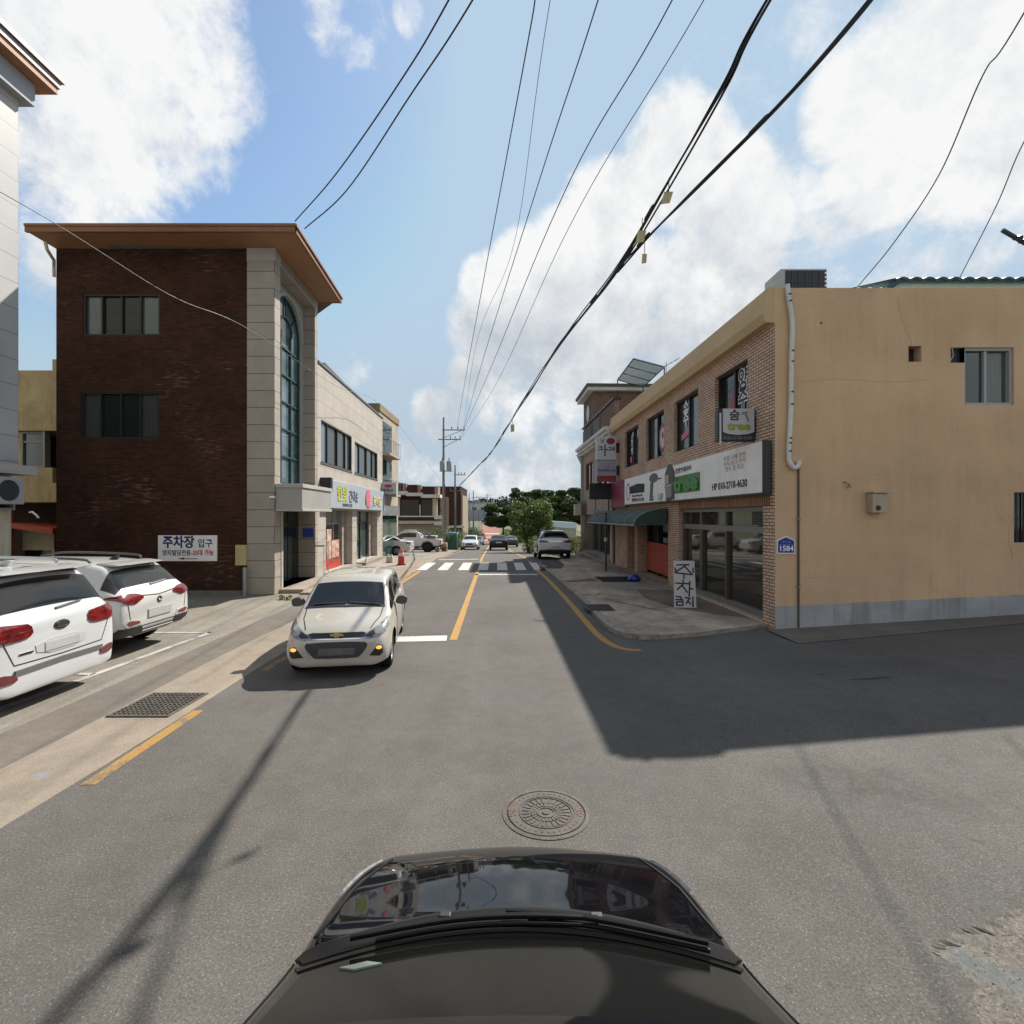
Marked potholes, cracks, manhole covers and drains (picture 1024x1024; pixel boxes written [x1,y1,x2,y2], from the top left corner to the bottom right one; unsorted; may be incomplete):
drain grate [105,692,208,717]
manhole cover [502,789,590,841]
